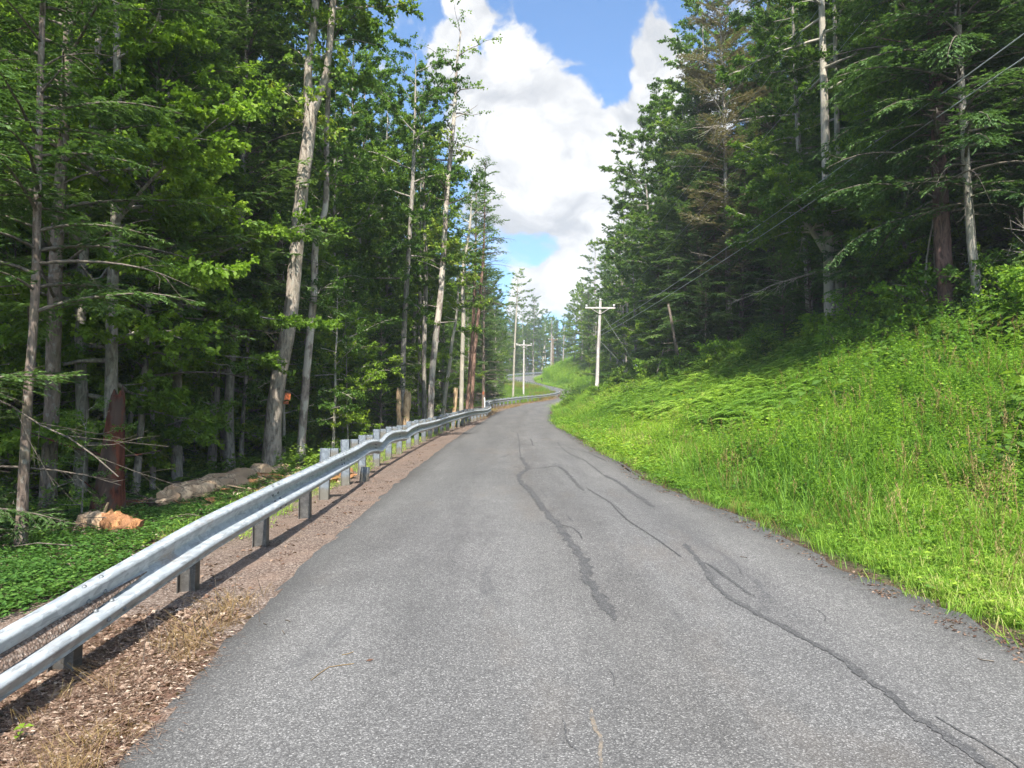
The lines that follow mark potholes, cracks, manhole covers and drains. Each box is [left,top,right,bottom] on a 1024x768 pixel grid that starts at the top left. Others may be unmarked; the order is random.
crack [507,434,1021,768]
